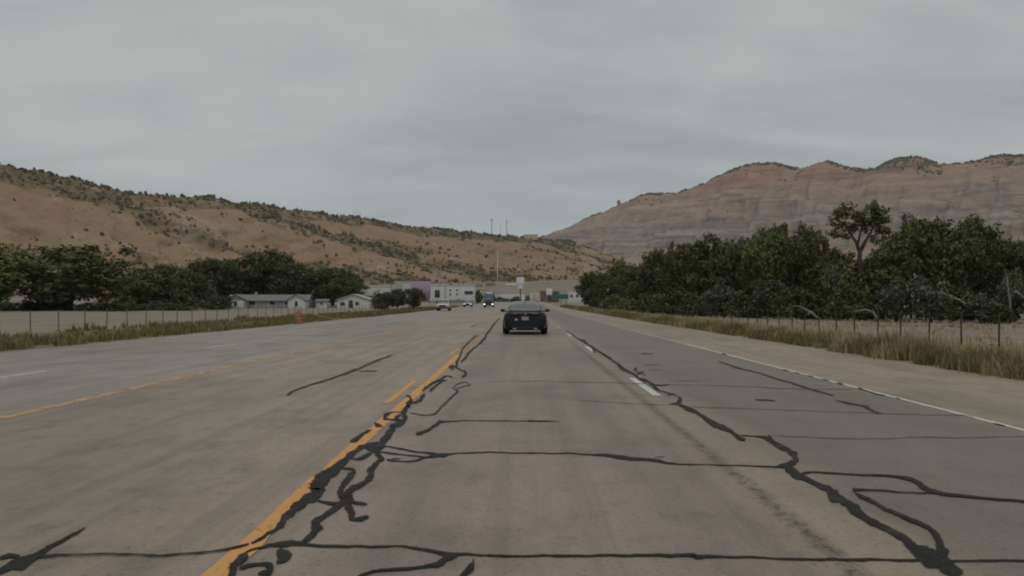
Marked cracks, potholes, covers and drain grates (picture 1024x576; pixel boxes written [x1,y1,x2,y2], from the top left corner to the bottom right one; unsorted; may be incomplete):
crack [498,353,1024,439]
